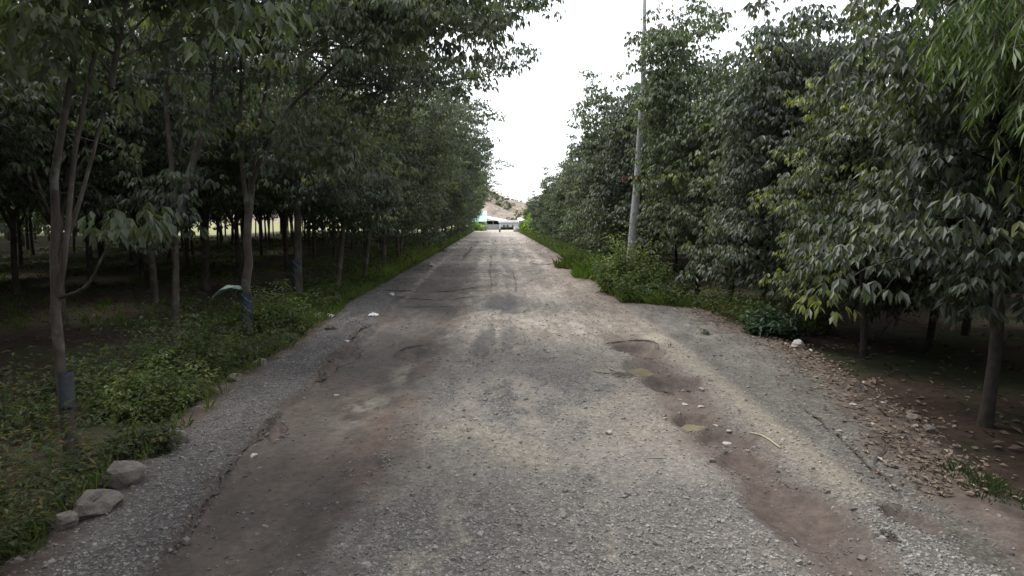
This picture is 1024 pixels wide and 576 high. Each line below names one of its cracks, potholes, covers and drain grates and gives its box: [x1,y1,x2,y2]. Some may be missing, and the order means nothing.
pothole [618,359,663,377]
pothole [610,341,665,359]
pothole [639,376,707,393]
pothole [668,413,721,432]
pothole [264,415,286,443]
crack [385,256,517,307]
